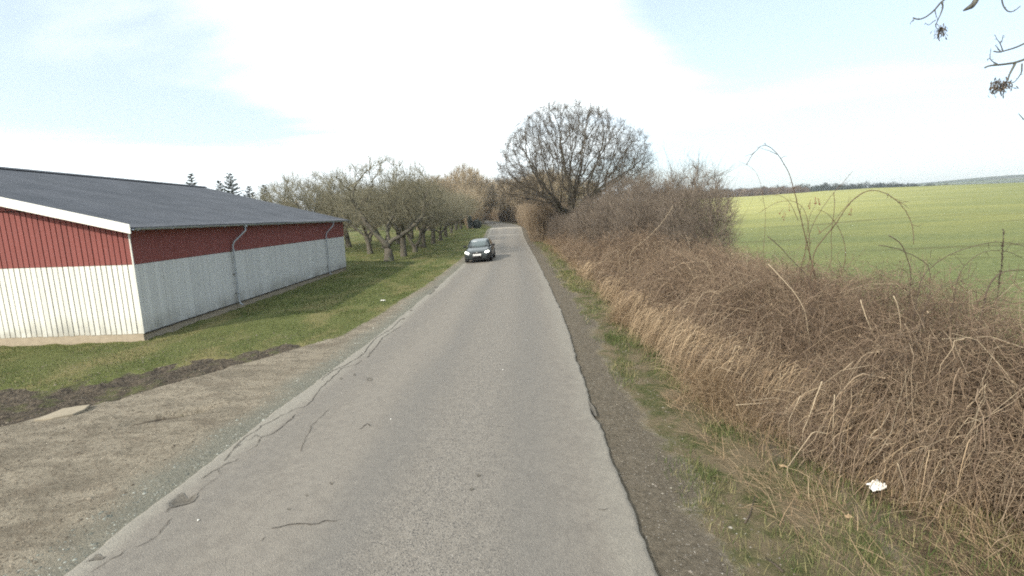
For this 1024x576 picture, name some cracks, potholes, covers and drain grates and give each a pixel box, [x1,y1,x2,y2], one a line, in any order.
crack [263,519,342,539]
crack [200,319,401,490]
pothole [168,492,198,507]
